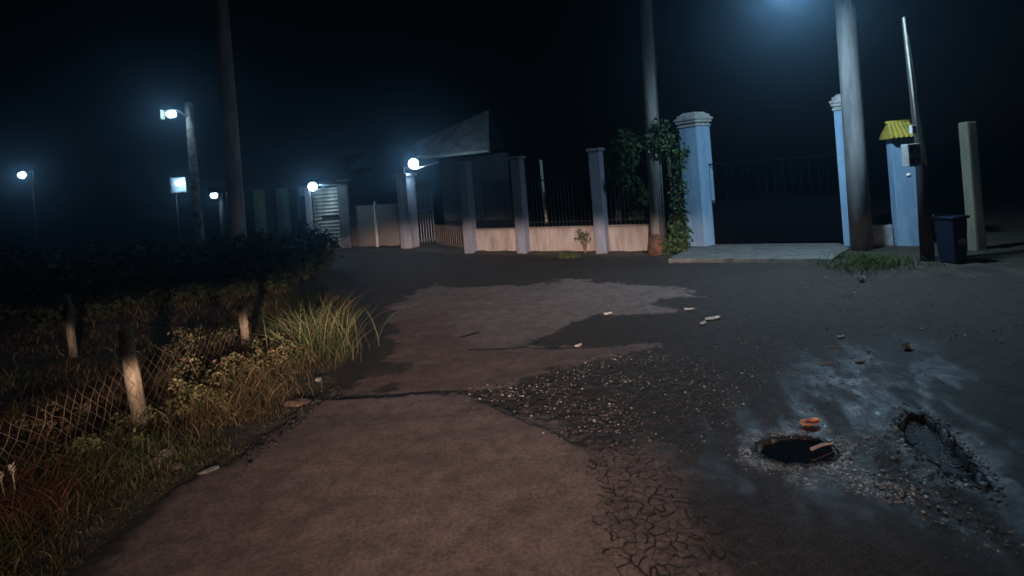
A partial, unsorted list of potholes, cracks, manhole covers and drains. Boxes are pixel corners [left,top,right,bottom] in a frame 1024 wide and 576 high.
pothole [751,434,842,468]
pothole [893,409,992,489]
crack [310,390,740,576]
crack [460,332,609,350]
